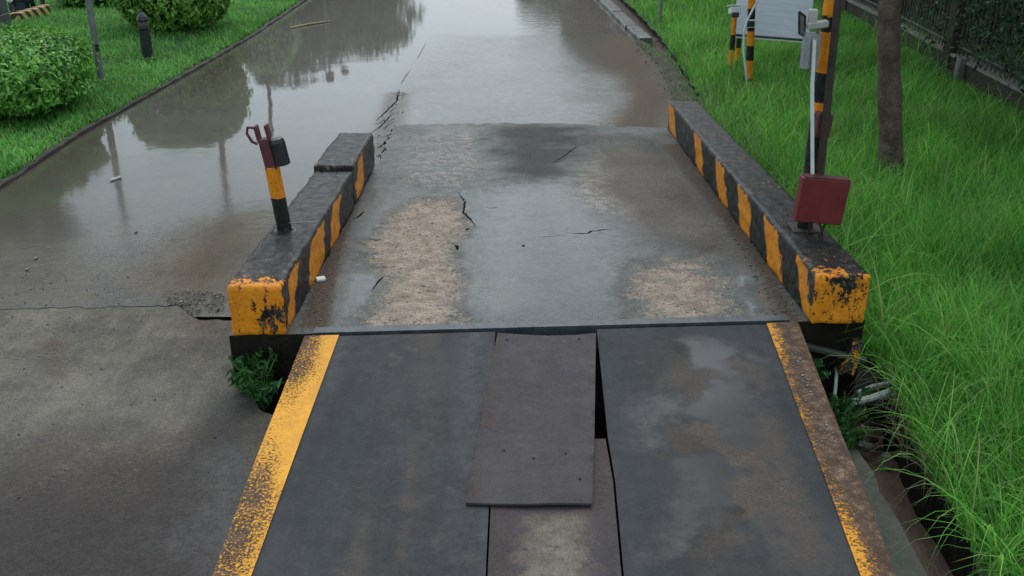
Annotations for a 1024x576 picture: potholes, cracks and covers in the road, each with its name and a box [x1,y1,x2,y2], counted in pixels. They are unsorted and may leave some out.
crack [371,47,424,157]
crack [459,194,476,226]
